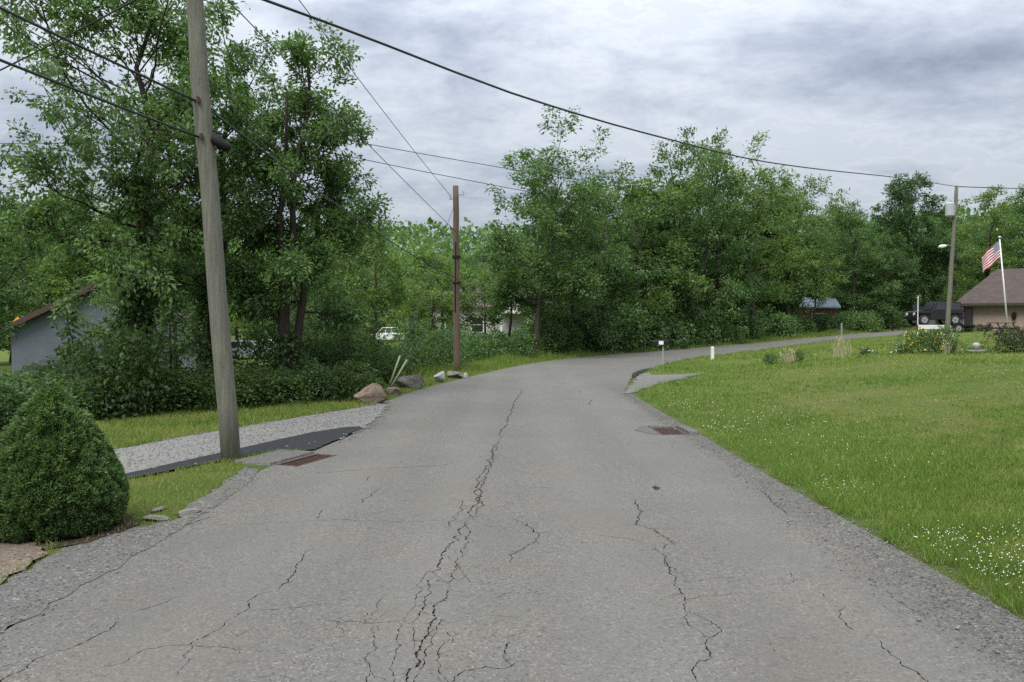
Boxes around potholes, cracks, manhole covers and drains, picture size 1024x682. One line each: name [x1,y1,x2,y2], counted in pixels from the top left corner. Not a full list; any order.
crack [185,464,447,526]
drain grate [233,449,336,466]
crack [509,521,552,562]
crack [601,498,732,679]
drain grate [647,425,700,435]
crack [91,548,326,676]
crack [821,593,928,682]
crack [0,597,176,682]
crack [327,391,543,682]
